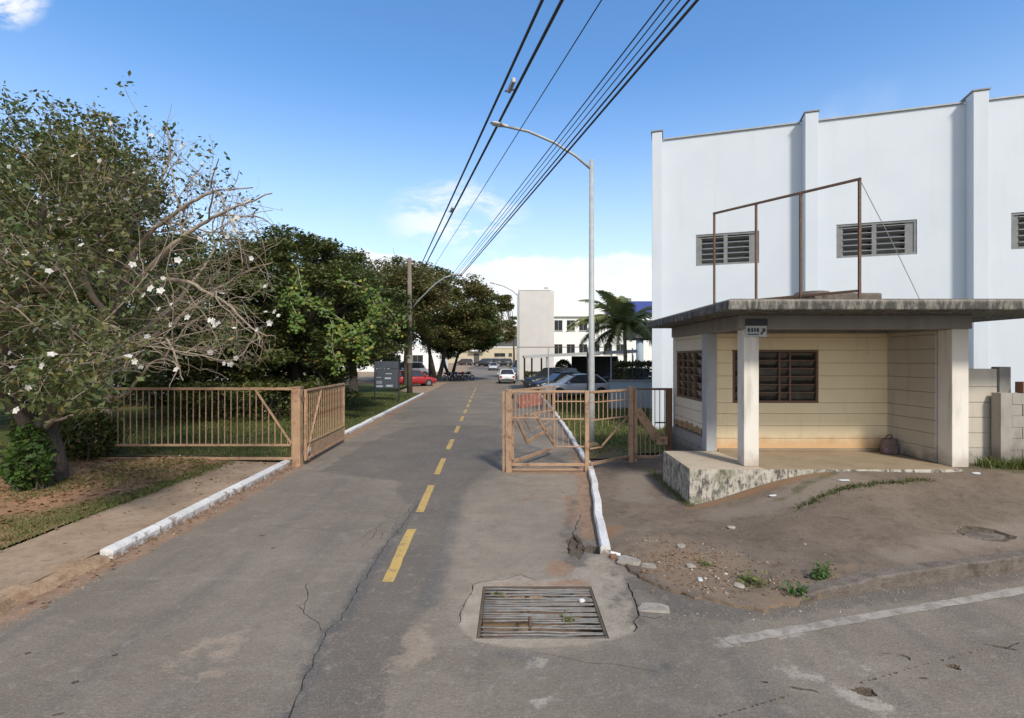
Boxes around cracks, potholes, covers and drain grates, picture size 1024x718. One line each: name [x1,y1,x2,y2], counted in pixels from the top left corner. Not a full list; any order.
crack [296,582,324,632]
crack [628,583,663,632]
drain grate [476,586,609,638]
pothole [566,534,585,561]
